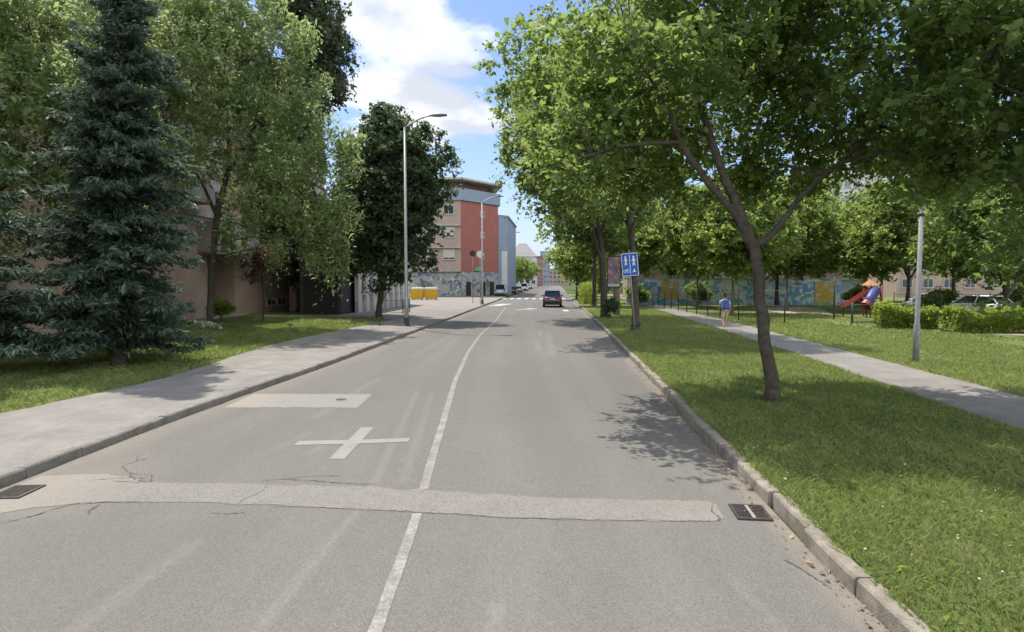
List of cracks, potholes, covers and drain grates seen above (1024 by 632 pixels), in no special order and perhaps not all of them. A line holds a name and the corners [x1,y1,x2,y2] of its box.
crack [2,501,140,523]
drain grate [728,503,774,521]
drain grate [0,484,46,499]
crack [271,475,377,484]
